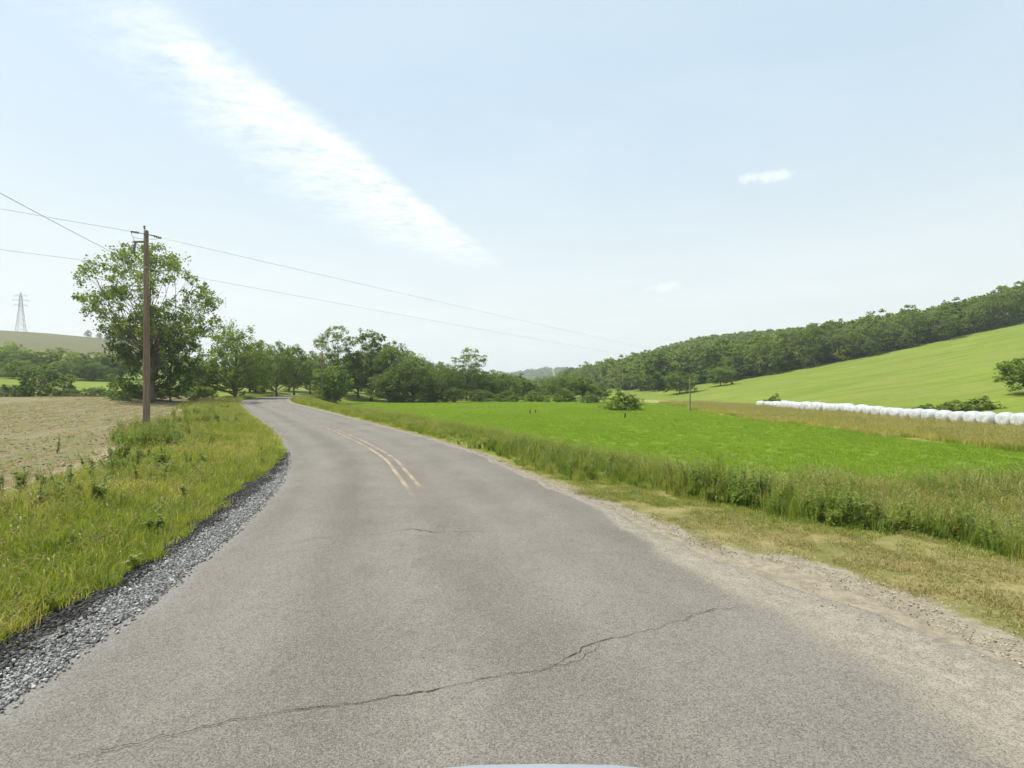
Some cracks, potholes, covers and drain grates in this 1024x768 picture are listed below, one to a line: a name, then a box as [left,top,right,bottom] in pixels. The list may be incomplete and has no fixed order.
crack [68,606,736,759]
